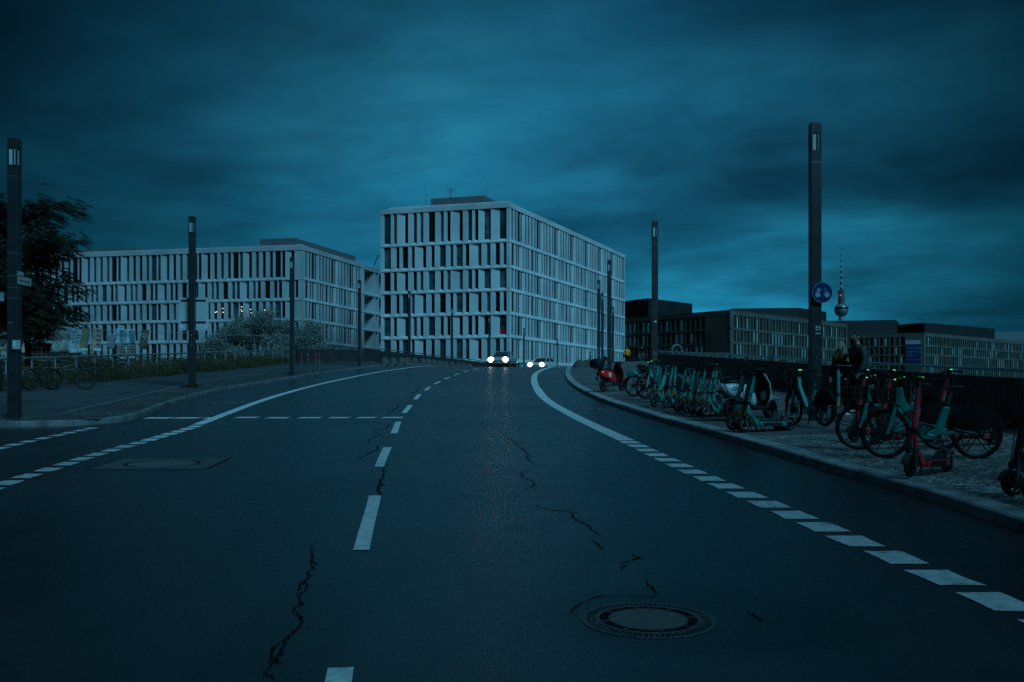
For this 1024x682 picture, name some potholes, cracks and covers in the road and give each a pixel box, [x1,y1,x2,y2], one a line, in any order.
manhole cover [86,458,231,470]
crack [506,436,644,569]
crack [360,386,421,497]
manhole cover [581,602,717,639]
crack [571,579,665,612]
crack [262,545,317,679]
